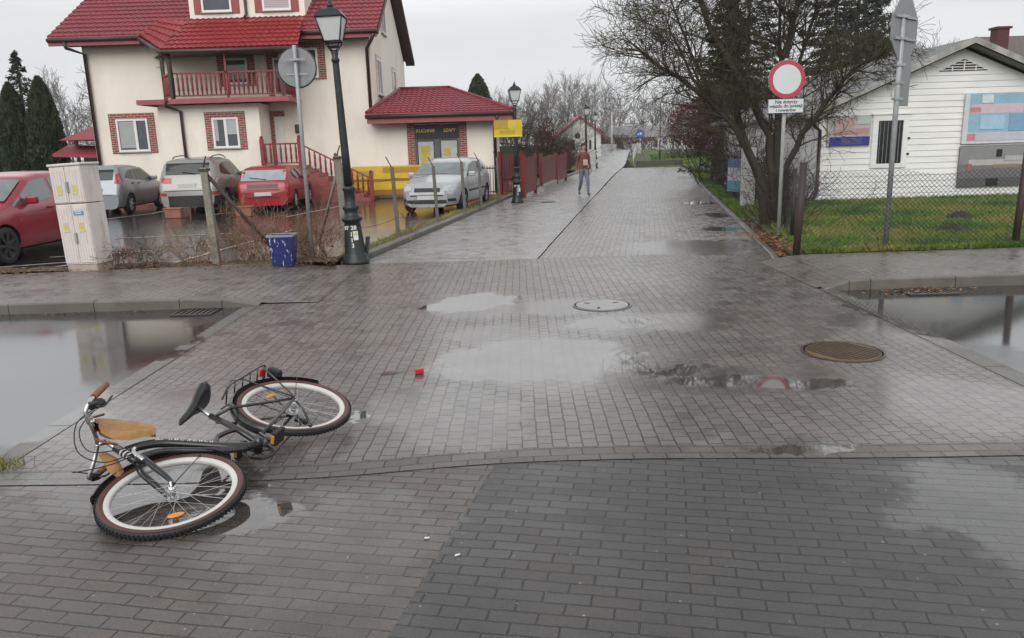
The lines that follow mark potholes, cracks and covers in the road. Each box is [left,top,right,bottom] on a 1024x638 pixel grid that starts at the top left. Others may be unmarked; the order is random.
drain grate [169,308,222,317]
manhole cover [573,299,632,311]
manhole cover [800,341,887,362]
